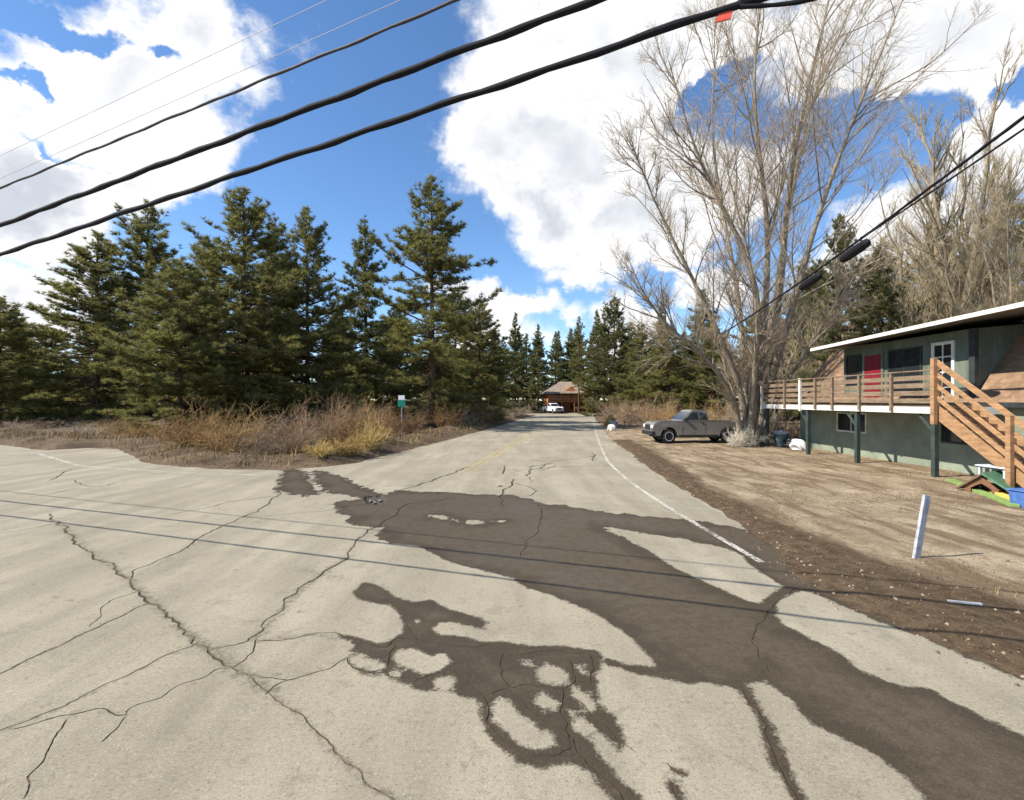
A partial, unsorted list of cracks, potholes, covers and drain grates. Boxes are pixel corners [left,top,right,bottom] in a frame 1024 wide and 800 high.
crack [740,586,802,800]
crack [0,453,659,800]
